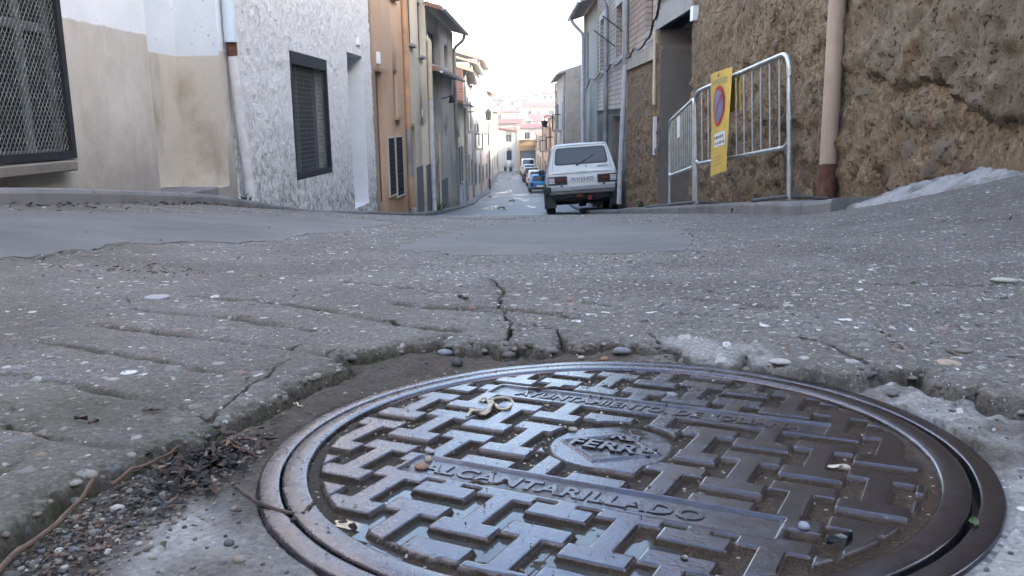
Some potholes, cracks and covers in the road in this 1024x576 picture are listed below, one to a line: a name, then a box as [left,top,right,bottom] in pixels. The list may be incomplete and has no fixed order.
crack [184,342,348,423]
manhole cover [258,361,1007,576]
crack [789,322,914,367]
crack [373,317,408,327]
crack [638,330,667,344]
crack [461,277,580,345]
